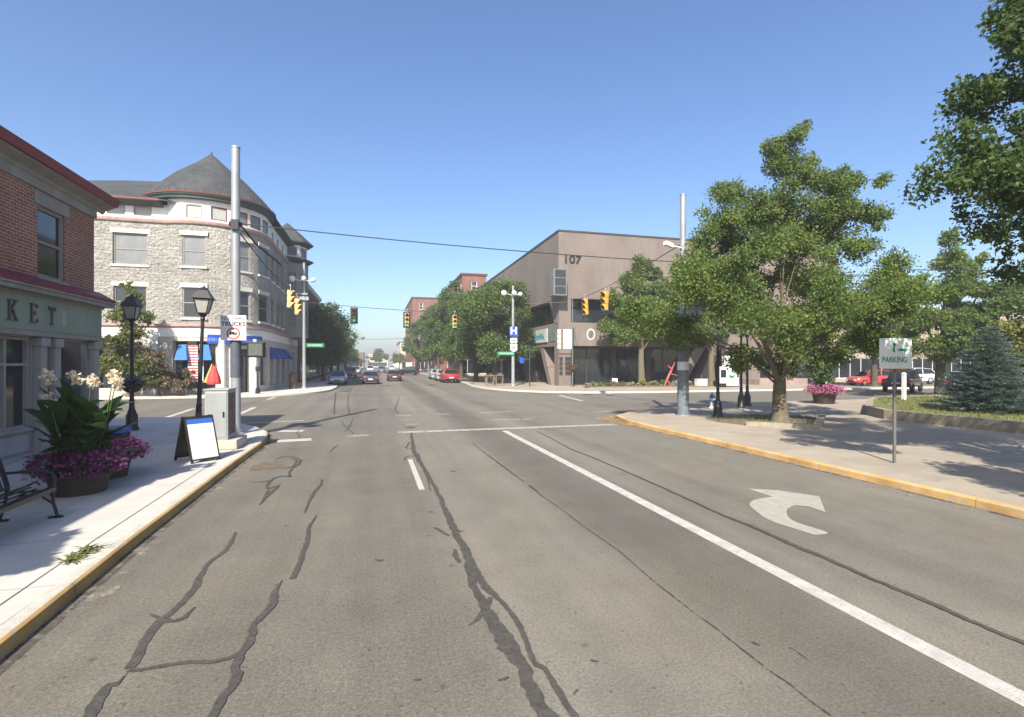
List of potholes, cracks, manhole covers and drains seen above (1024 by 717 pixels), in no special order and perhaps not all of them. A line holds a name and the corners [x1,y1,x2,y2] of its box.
crack [331,392,354,451]
crack [250,456,302,505]
crack [465,443,832,717]
